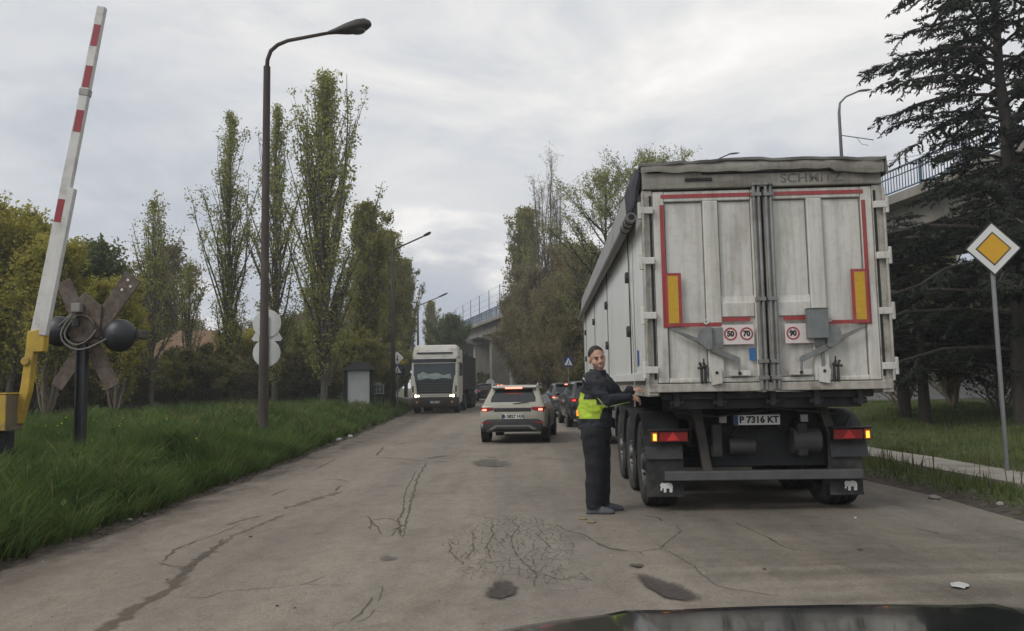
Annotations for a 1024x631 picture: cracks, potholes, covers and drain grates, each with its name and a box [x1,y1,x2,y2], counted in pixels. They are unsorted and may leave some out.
pothole [487,581,517,598]
crack [367,516,402,535]
crack [443,515,806,597]
crack [157,525,237,567]
pothole [639,575,697,600]
